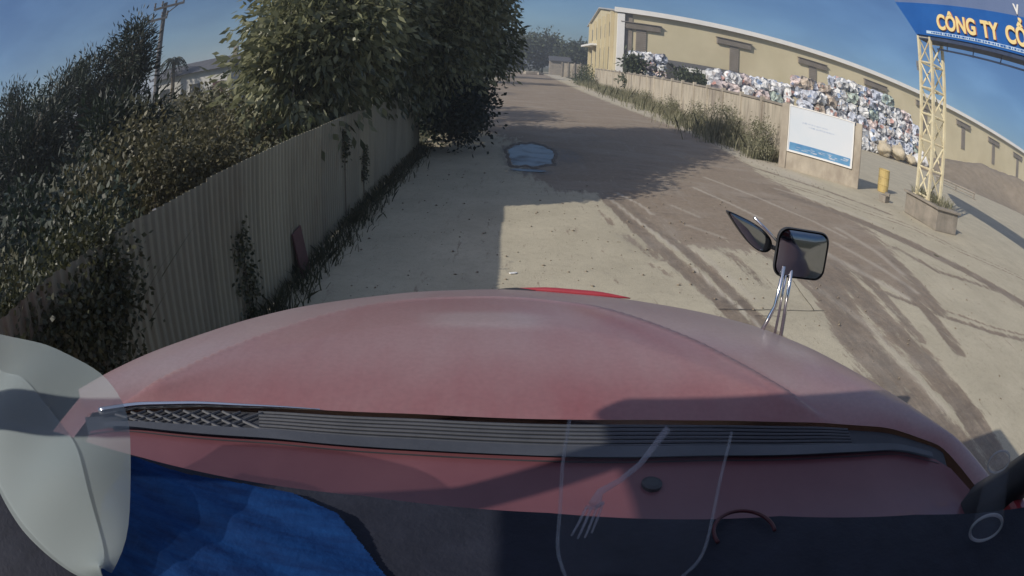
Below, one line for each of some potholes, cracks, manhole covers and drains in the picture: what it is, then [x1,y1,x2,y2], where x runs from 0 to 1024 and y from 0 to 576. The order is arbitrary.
pothole [503,142,558,169]
